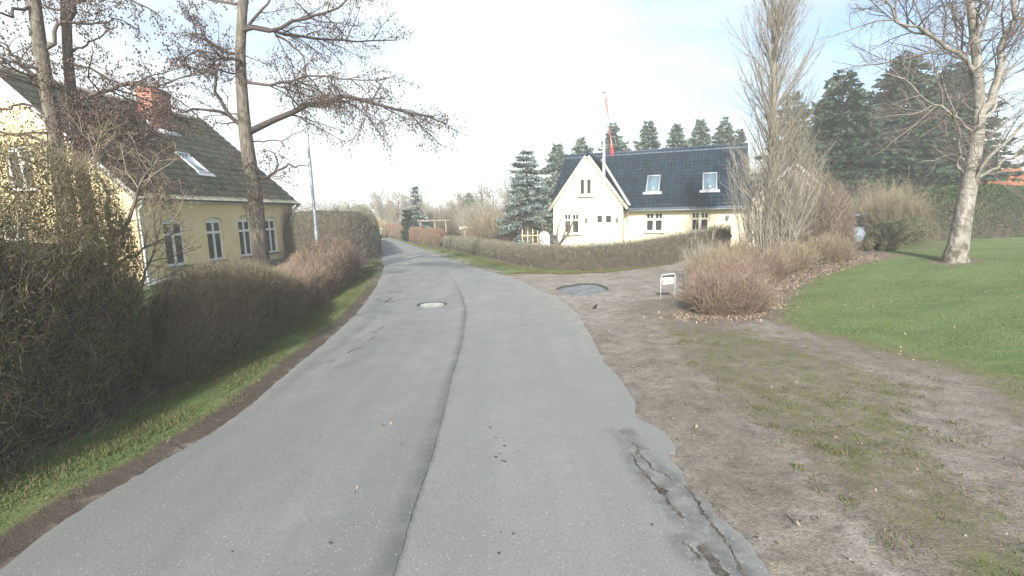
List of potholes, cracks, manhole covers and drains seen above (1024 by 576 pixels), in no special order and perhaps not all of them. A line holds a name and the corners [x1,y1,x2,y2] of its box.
crack [618,432,748,576]
